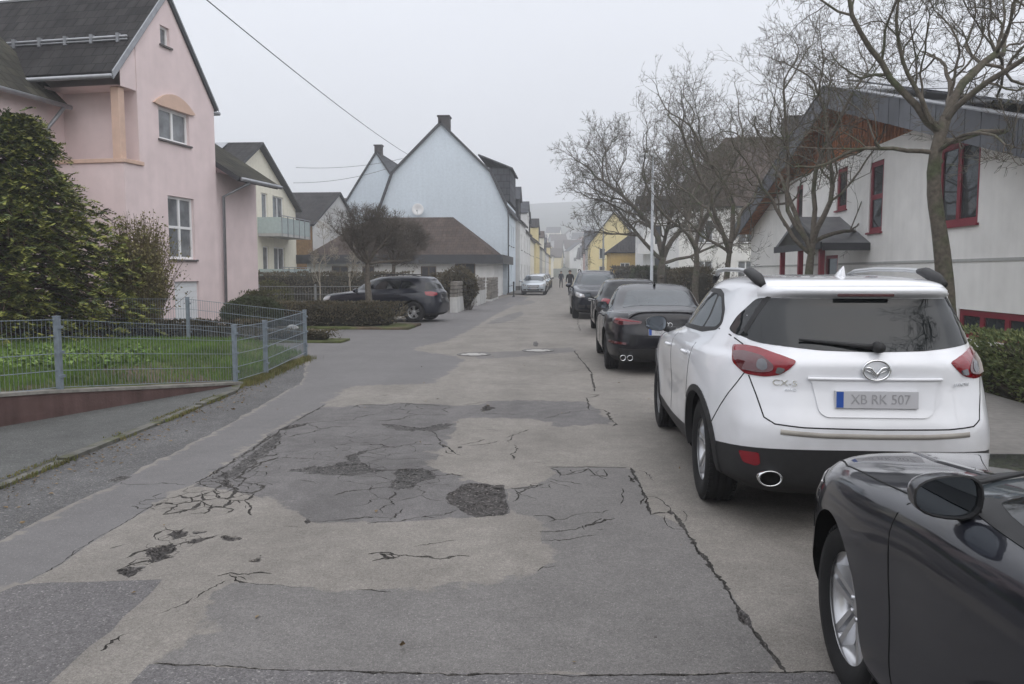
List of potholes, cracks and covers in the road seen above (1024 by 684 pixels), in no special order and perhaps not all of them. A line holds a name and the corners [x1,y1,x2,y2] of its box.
pothole [445,483,510,518]
crack [152,572,298,616]
pothole [145,547,177,564]
crack [110,389,618,570]
pothole [167,530,189,540]
pothole [388,468,436,490]
crack [101,634,124,651]
pothole [117,566,146,578]
